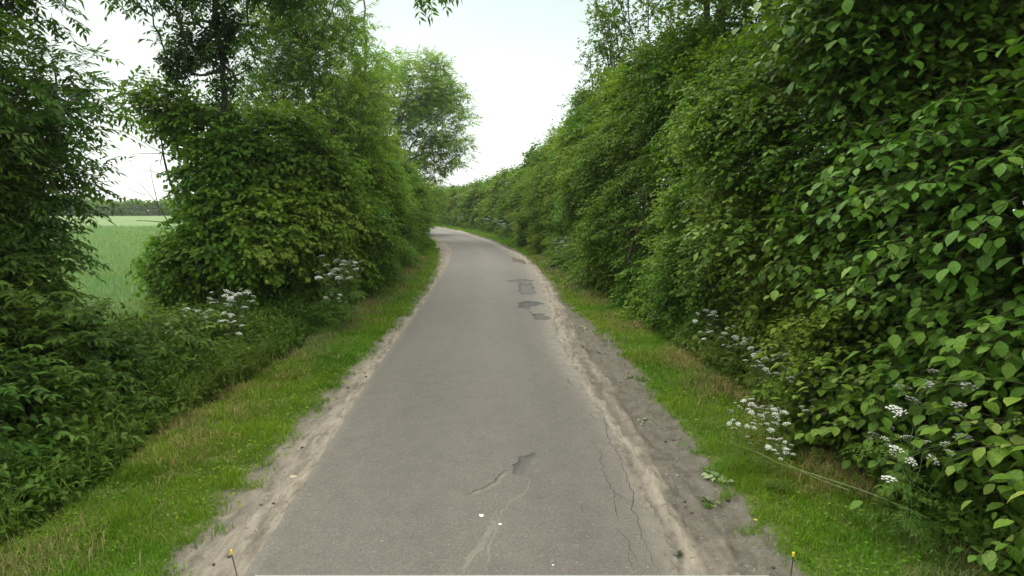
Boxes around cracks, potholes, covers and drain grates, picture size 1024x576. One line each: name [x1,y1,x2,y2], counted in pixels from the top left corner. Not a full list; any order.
pothole [512,451,537,475]
crack [590,404,660,573]
crack [462,471,530,574]
